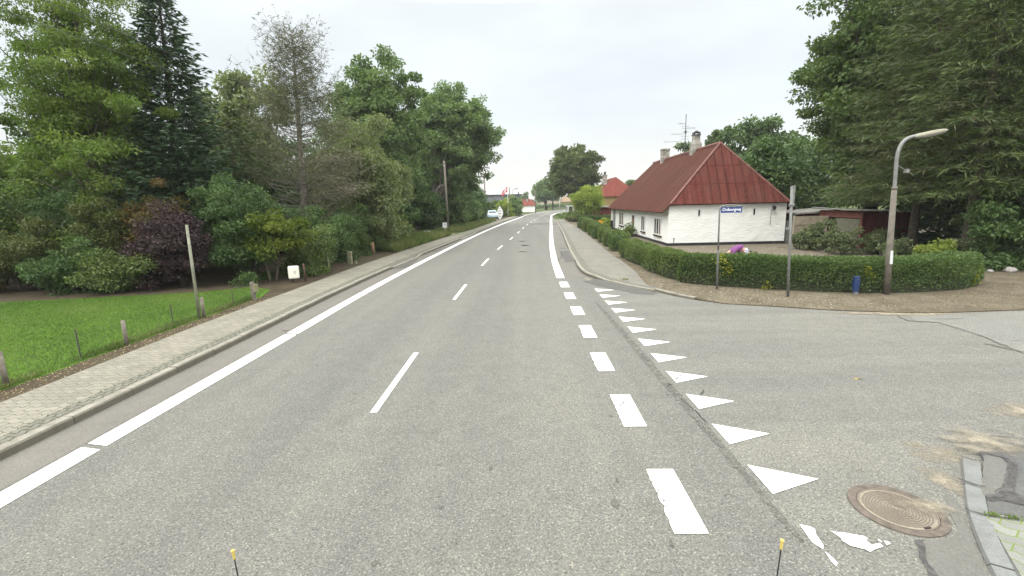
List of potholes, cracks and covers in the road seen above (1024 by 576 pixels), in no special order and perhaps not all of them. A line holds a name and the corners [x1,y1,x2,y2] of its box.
manhole cover [847,484,952,538]
